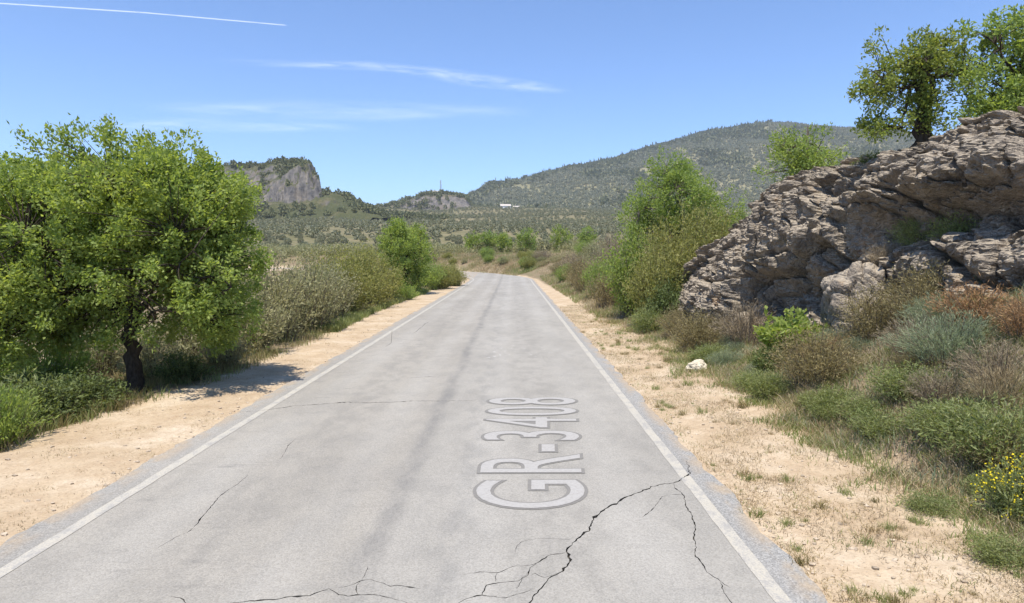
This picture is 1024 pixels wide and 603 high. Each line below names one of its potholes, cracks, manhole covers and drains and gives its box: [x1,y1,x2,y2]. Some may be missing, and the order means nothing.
crack [233,568,421,603]
crack [459,461,732,603]
